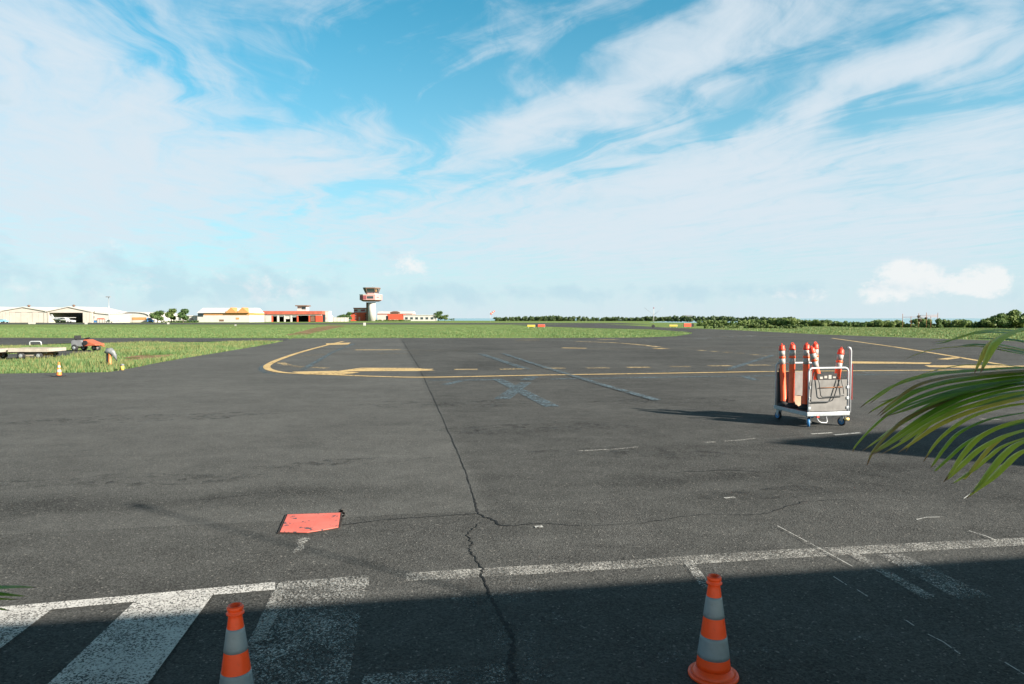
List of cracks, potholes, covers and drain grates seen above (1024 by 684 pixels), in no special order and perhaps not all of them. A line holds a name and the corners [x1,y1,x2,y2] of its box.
crack [466,513,589,684]
crack [607,499,865,525]
